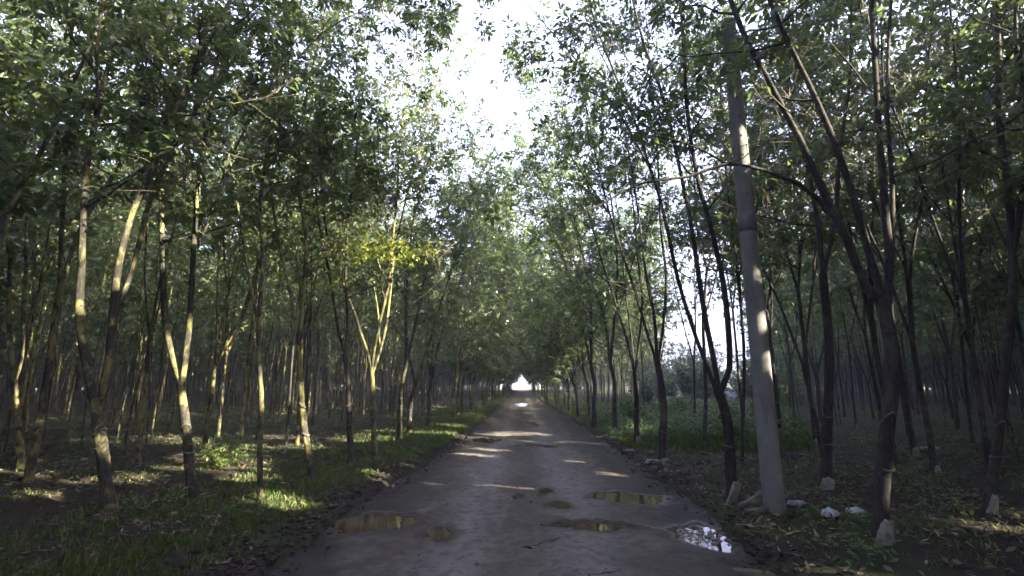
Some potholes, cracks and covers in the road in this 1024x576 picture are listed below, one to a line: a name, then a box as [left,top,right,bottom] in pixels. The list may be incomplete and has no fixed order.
pothole [326,511,430,536]
pothole [585,490,669,507]
pothole [506,492,531,501]
pothole [659,520,743,557]
pothole [542,500,578,511]
pothole [415,526,459,543]
pothole [533,487,560,496]
crack [526,535,571,549]
pothole [543,518,658,534]
